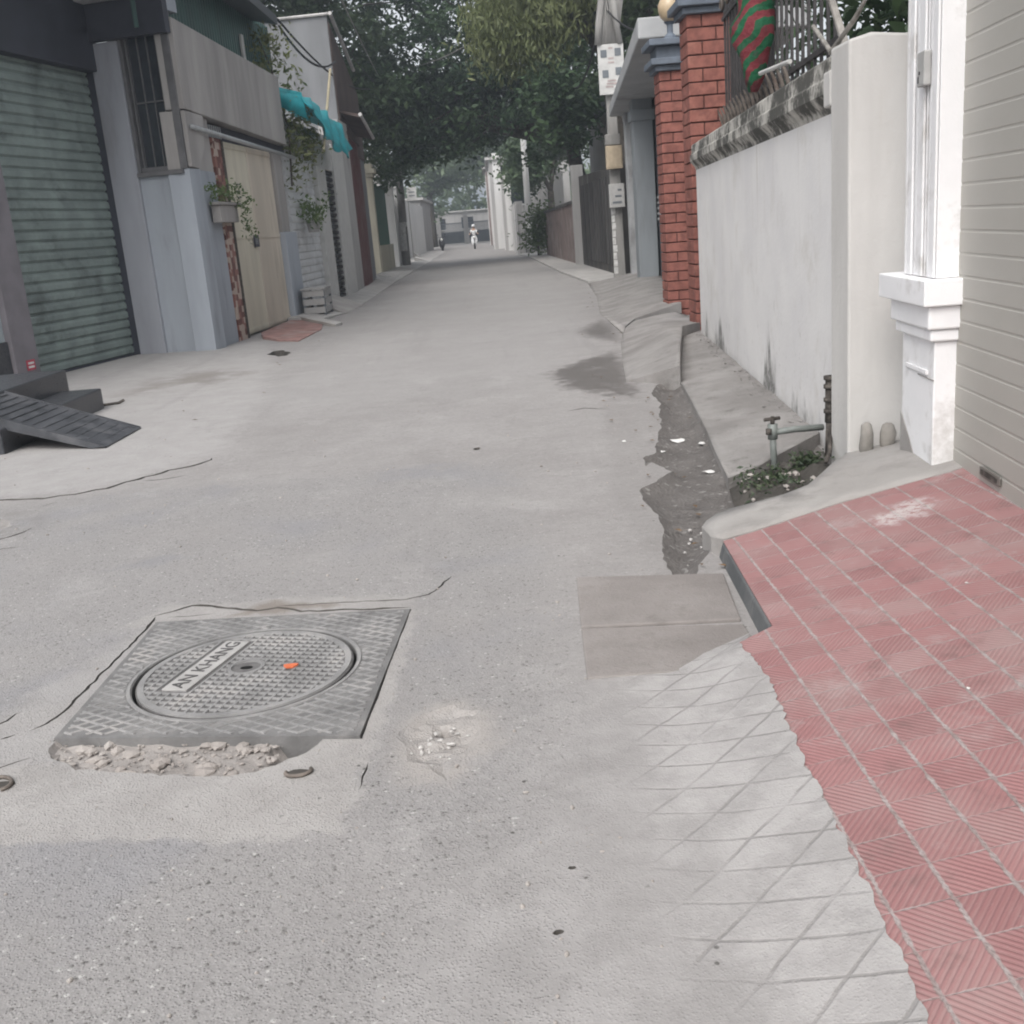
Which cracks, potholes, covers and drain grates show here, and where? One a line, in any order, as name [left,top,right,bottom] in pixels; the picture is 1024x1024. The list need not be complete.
manhole cover [54,609,411,759]
pothole [48,741,288,776]
pothole [396,705,481,781]
crack [0,577,451,740]
crack [0,458,212,505]
